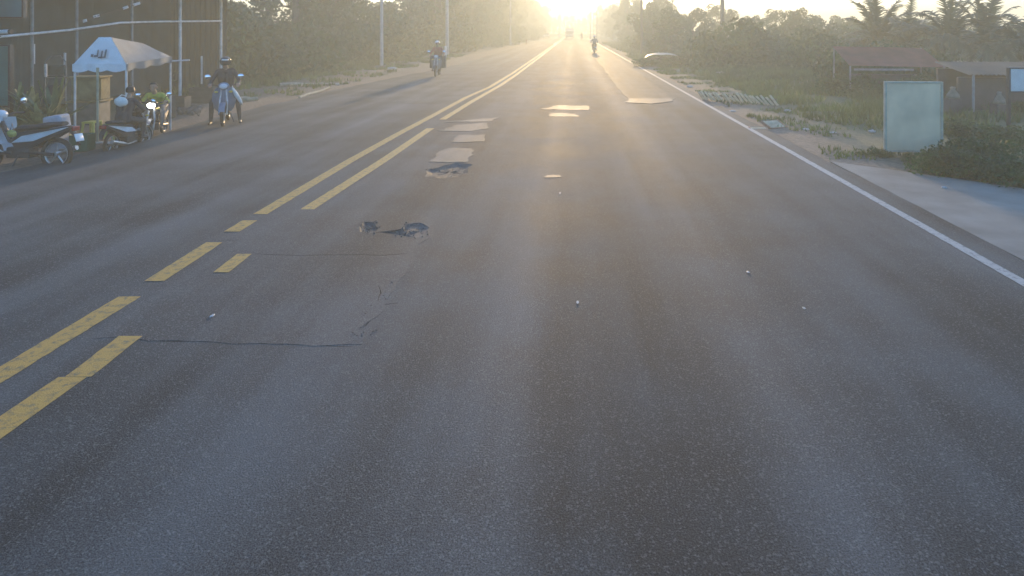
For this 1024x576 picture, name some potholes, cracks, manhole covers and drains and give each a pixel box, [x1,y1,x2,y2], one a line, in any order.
pothole [357,220,381,234]
crack [167,272,409,347]
pothole [374,221,429,239]
pothole [422,163,473,180]
